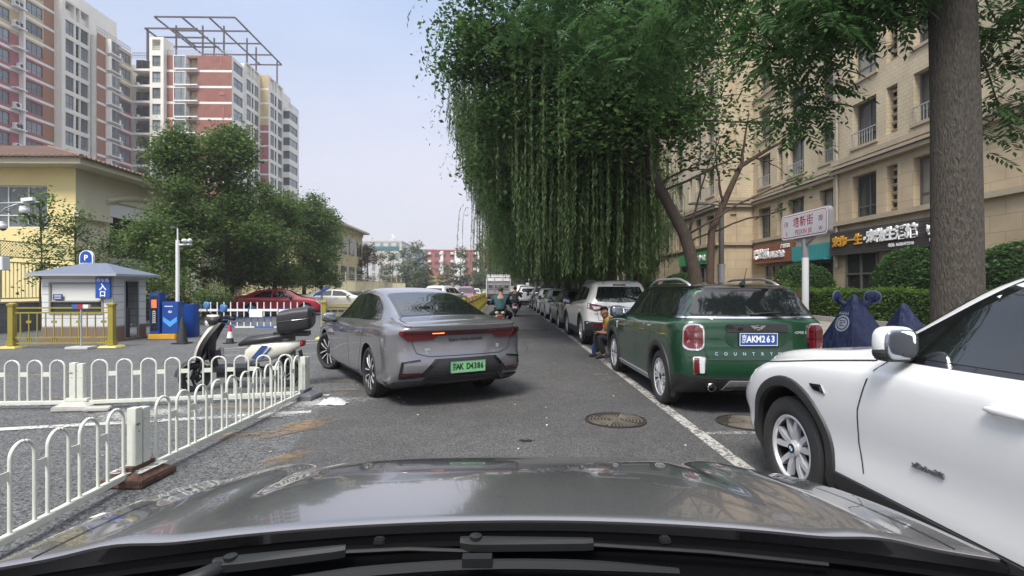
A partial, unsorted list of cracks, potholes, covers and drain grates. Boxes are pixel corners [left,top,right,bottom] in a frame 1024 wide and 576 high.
manhole cover [715,414,755,431]
manhole cover [585,412,647,428]
